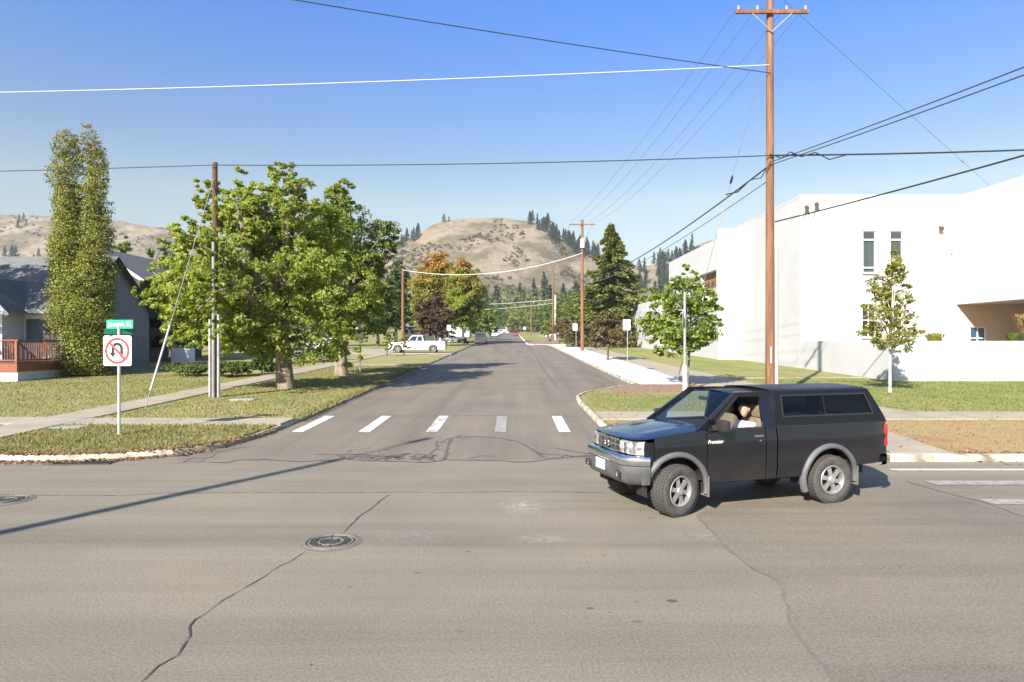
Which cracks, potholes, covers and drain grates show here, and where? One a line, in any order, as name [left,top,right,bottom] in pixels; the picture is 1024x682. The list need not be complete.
manhole cover [0,494,37,506]
manhole cover [299,533,362,551]
crack [172,446,250,464]
crack [141,553,302,682]
